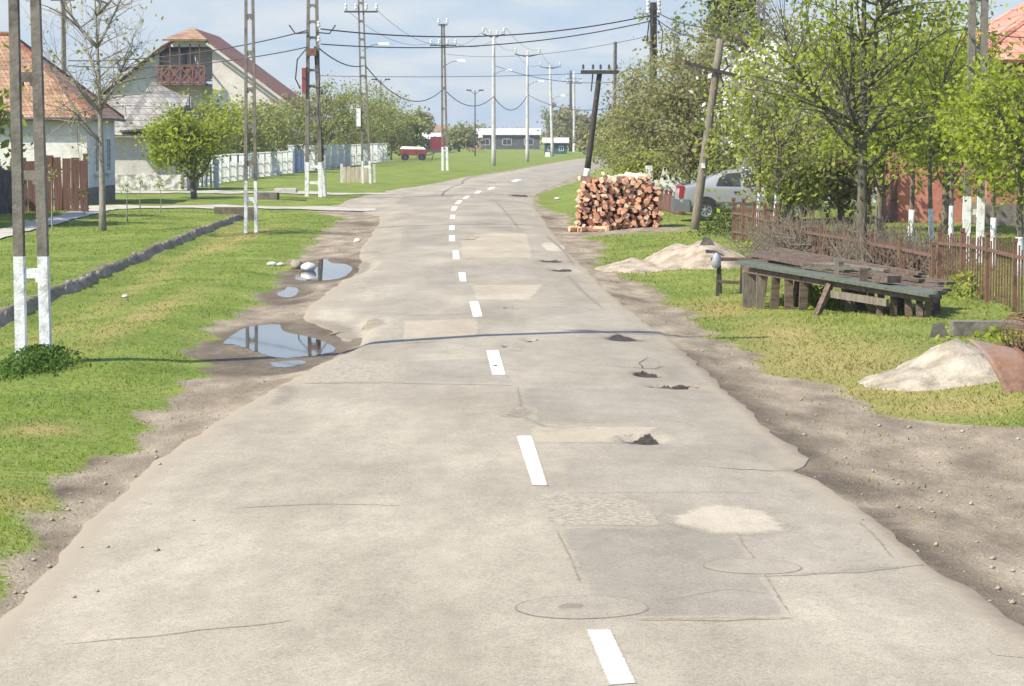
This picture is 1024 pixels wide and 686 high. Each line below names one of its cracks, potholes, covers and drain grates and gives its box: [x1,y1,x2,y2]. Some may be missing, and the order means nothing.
pothole [632,370,663,378]
manhole cover [702,558,803,574]
pothole [621,433,659,445]
crack [69,620,290,644]
pothole [602,334,647,342]
crack [617,357,663,370]
manhole cover [514,595,650,619]
